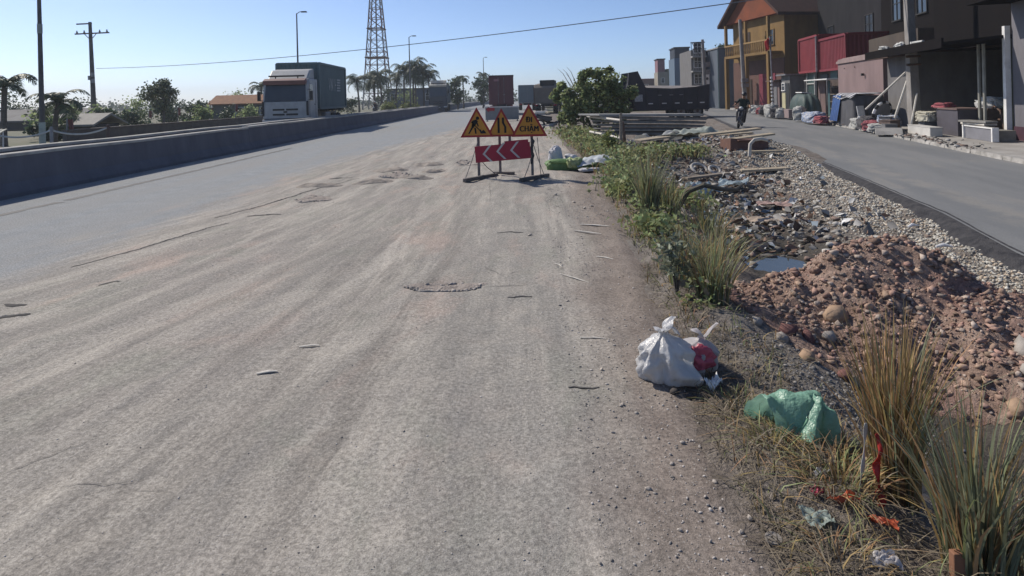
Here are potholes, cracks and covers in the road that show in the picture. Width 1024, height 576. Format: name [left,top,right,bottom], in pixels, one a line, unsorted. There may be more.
pothole [404,282,489,292]
crack [72,177,358,267]
pothole [294,194,333,203]
